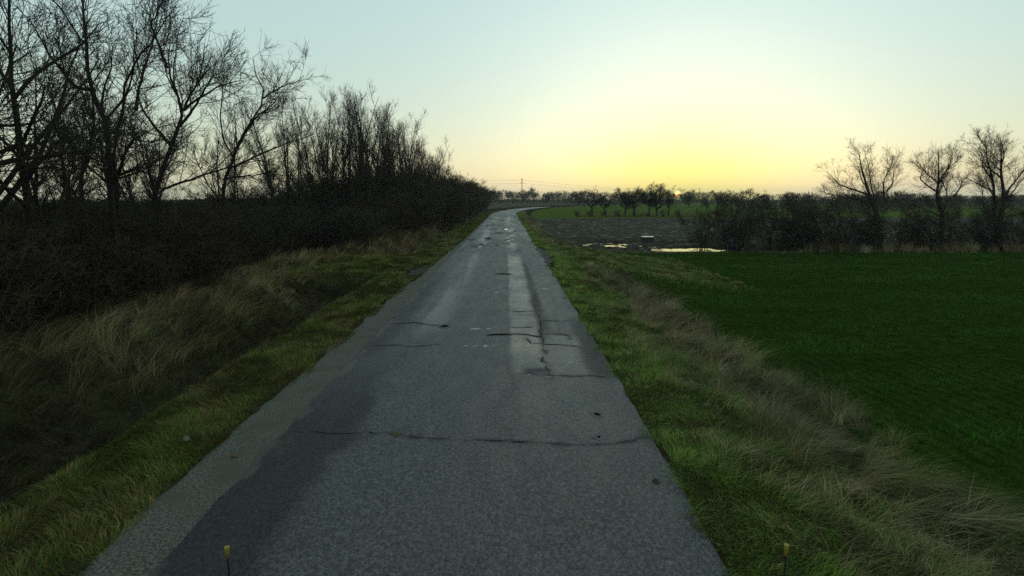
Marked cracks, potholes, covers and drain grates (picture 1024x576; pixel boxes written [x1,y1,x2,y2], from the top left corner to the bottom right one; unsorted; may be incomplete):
crack [510,302,604,377]
crack [298,431,635,445]
